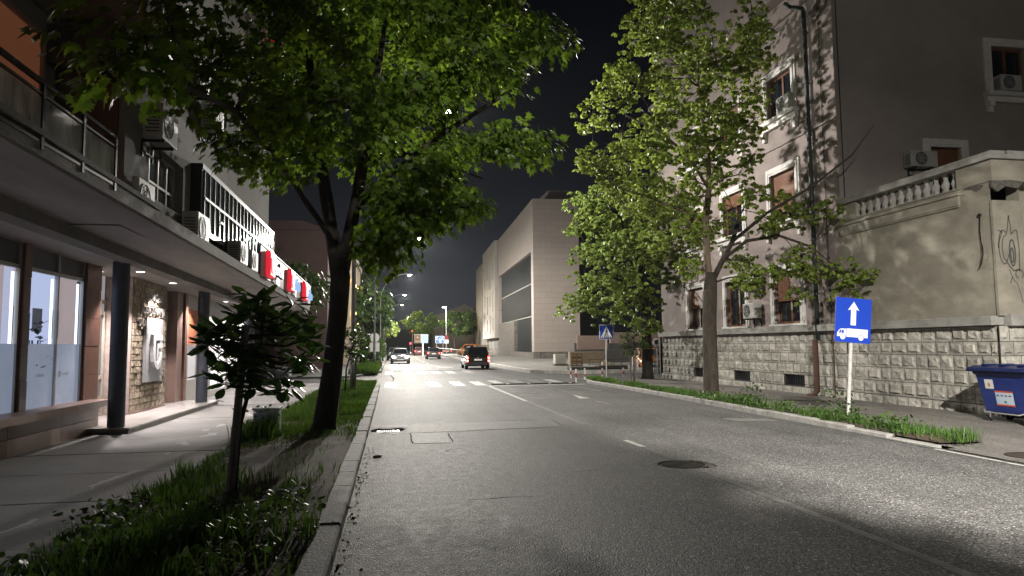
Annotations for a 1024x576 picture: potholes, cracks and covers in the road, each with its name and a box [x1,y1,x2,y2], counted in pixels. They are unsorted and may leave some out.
manhole cover [657,460,708,469]
